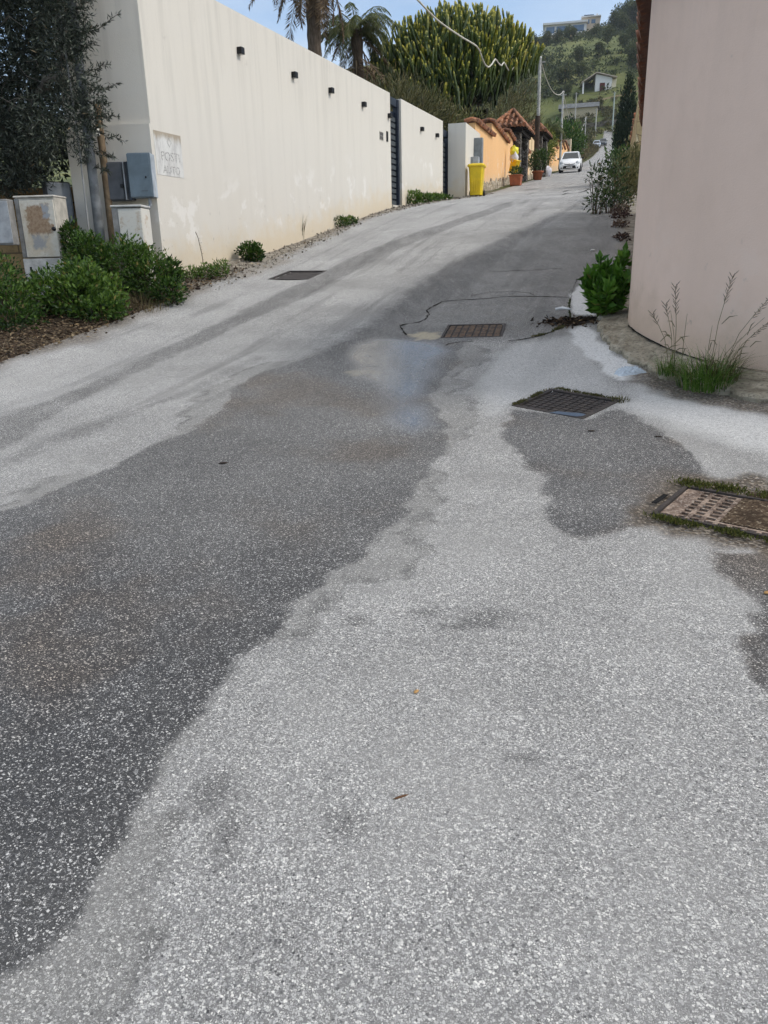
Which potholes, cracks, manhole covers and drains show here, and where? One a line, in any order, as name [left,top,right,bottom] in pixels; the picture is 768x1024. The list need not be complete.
crack [400,268,577,341]
